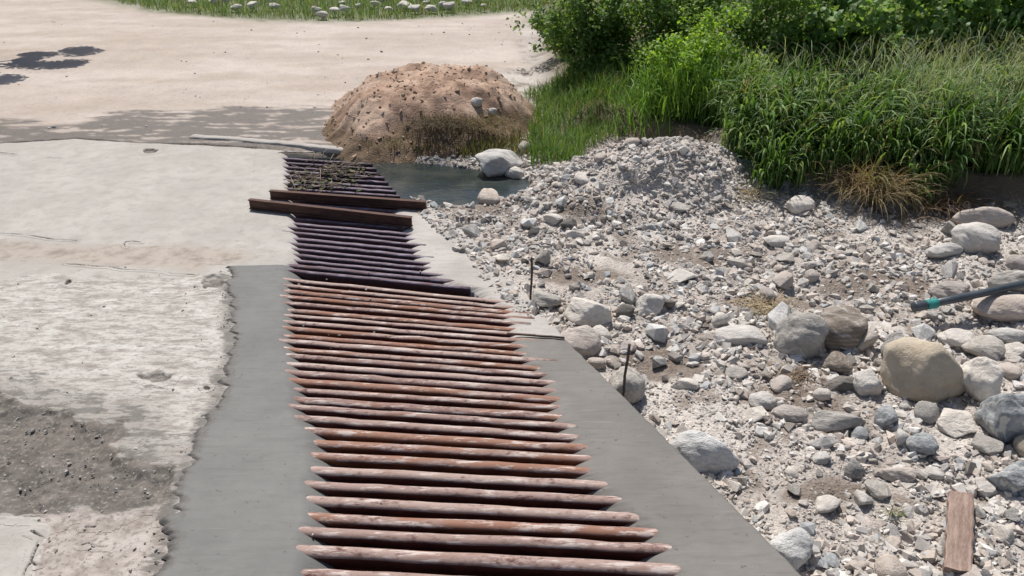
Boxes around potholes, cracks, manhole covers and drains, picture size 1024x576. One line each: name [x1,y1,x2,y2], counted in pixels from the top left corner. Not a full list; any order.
crack [0,231,81,242]
drain grate [282,158,471,297]
pothole [127,365,184,388]
pothole [137,146,165,155]
crack [62,239,198,276]
drain grate [279,278,681,576]
crack [14,512,136,576]
